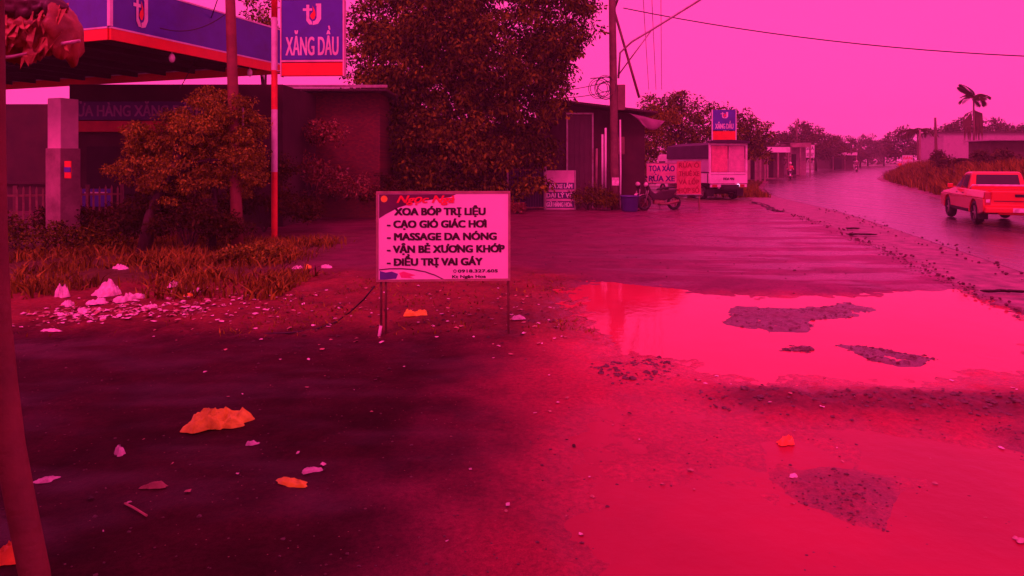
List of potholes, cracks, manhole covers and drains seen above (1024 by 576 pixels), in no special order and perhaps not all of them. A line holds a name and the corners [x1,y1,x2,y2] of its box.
crack [751,202,783,212]
crack [846,227,877,235]
pothole [523,274,1024,399]
